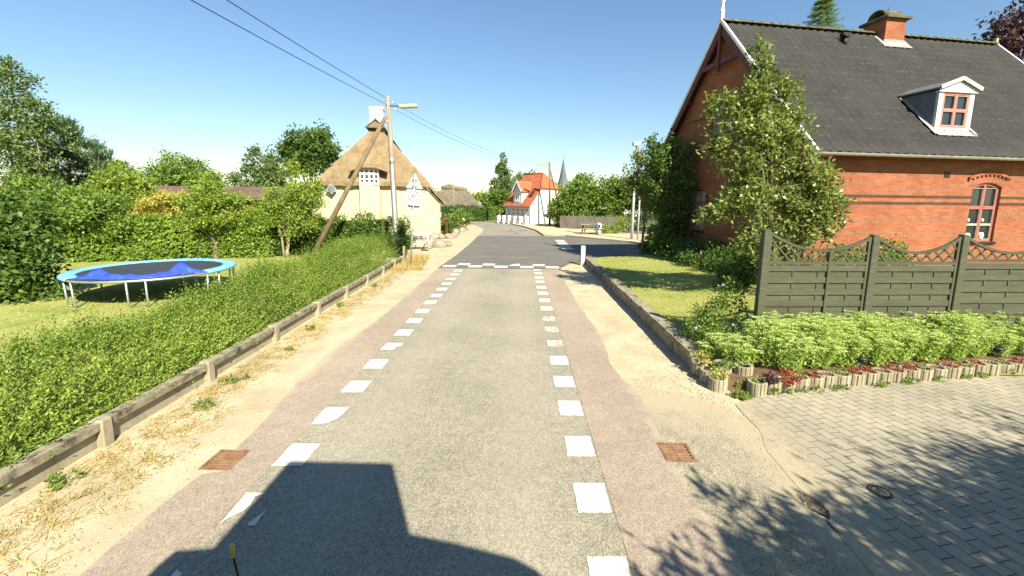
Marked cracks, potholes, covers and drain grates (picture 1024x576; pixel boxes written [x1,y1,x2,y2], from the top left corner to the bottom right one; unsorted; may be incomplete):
drain grate [656,442,699,462]
manhole cover [867,484,894,499]
pothole [796,493,832,519]
drain grate [198,449,250,470]
